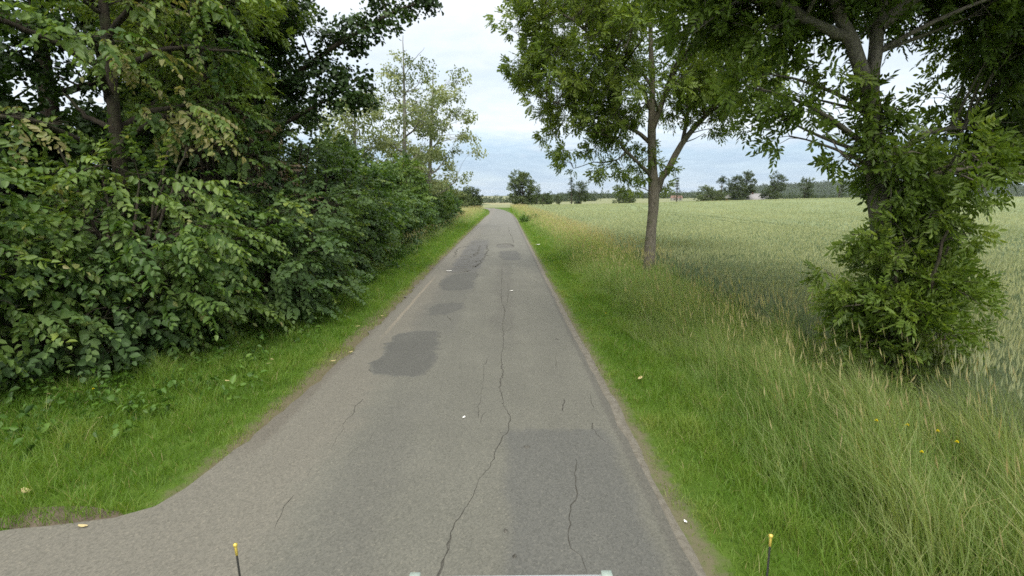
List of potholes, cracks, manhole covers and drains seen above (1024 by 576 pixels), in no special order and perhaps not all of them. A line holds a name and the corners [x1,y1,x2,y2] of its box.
crack [568,461,588,575]
crack [436,271,517,576]
